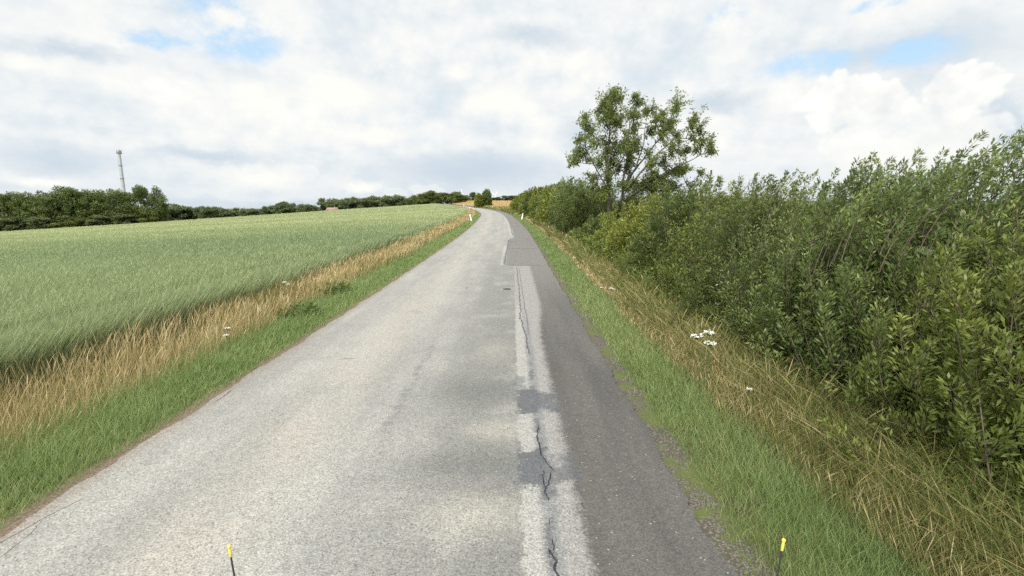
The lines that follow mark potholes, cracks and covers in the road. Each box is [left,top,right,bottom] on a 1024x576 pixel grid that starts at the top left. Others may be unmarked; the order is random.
crack [0,499,82,558]
crack [536,425,554,500]
